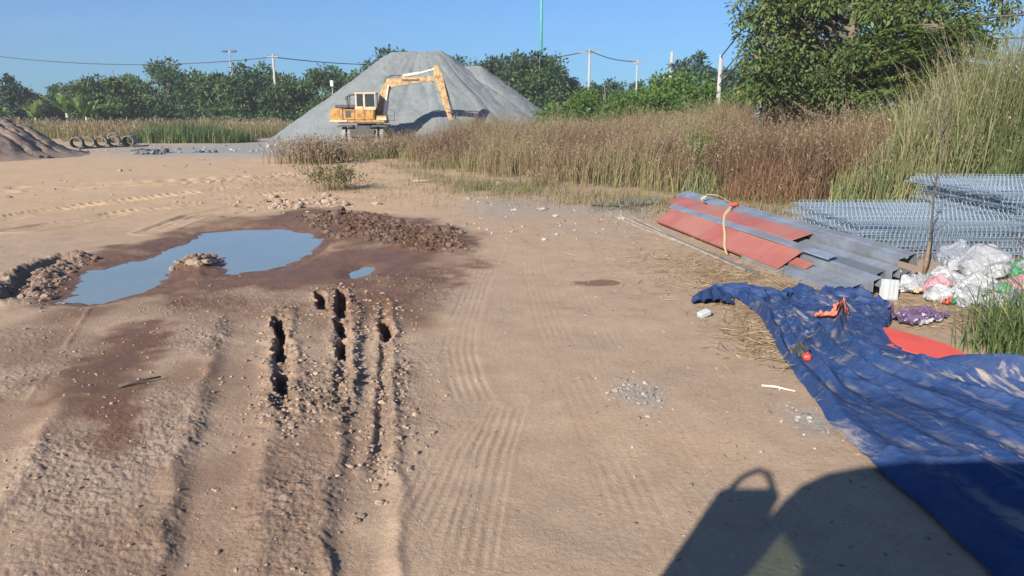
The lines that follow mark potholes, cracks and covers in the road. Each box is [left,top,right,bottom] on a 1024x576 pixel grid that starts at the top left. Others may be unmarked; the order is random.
pothole [20,223,350,311]
pothole [341,263,384,279]
